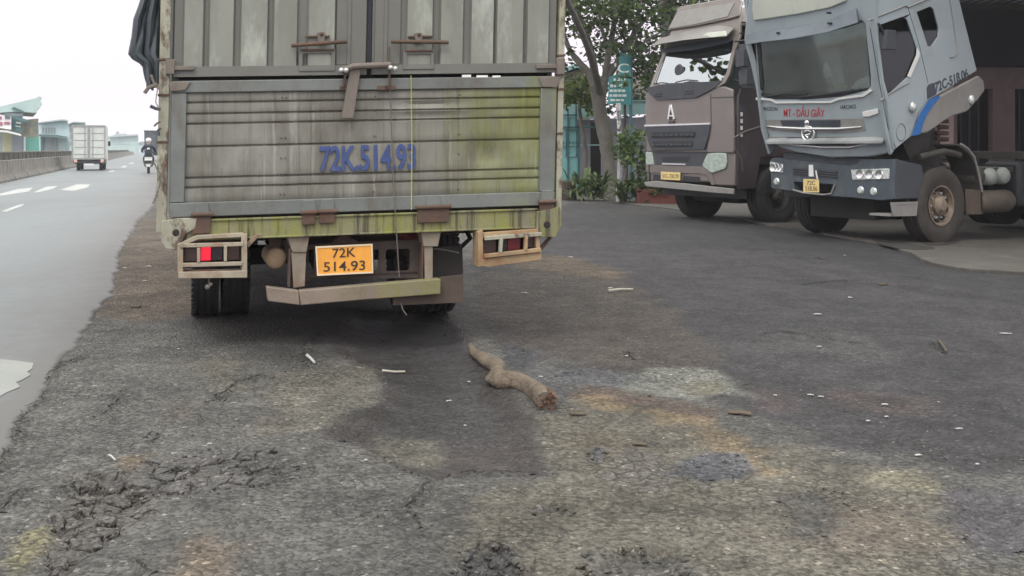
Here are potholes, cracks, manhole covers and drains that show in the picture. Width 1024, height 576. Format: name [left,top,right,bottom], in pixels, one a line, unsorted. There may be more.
crack [362,469,575,530]
crack [202,331,327,403]
pothole [450,542,527,576]
crack [0,356,304,526]
pothole [574,546,689,576]
